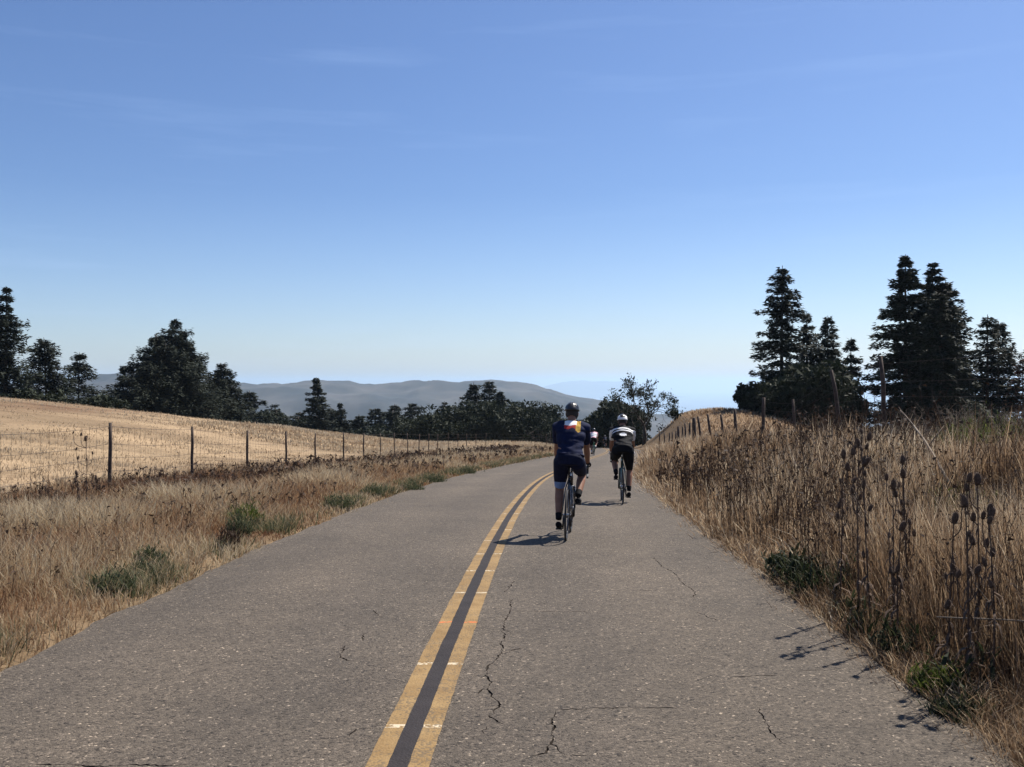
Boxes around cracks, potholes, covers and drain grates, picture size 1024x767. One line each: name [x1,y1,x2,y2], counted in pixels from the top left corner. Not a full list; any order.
crack [474,584,585,737]
crack [530,707,673,756]
